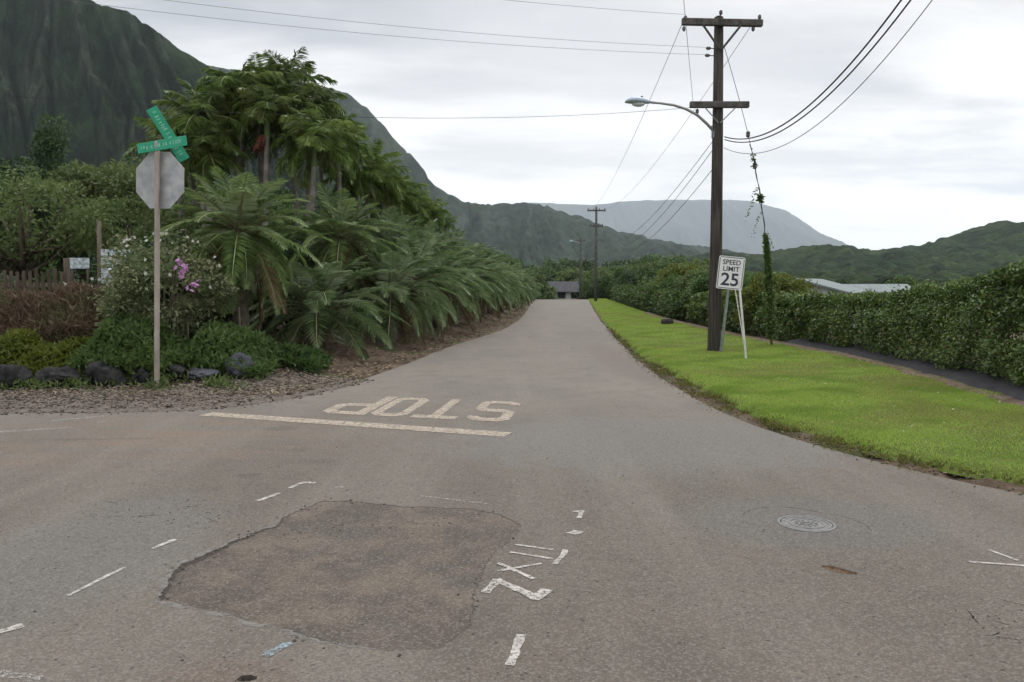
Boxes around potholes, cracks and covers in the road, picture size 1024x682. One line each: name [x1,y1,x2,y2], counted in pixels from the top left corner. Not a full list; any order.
manhole cover [777,515,837,532]
crack [967,599,1022,640]
